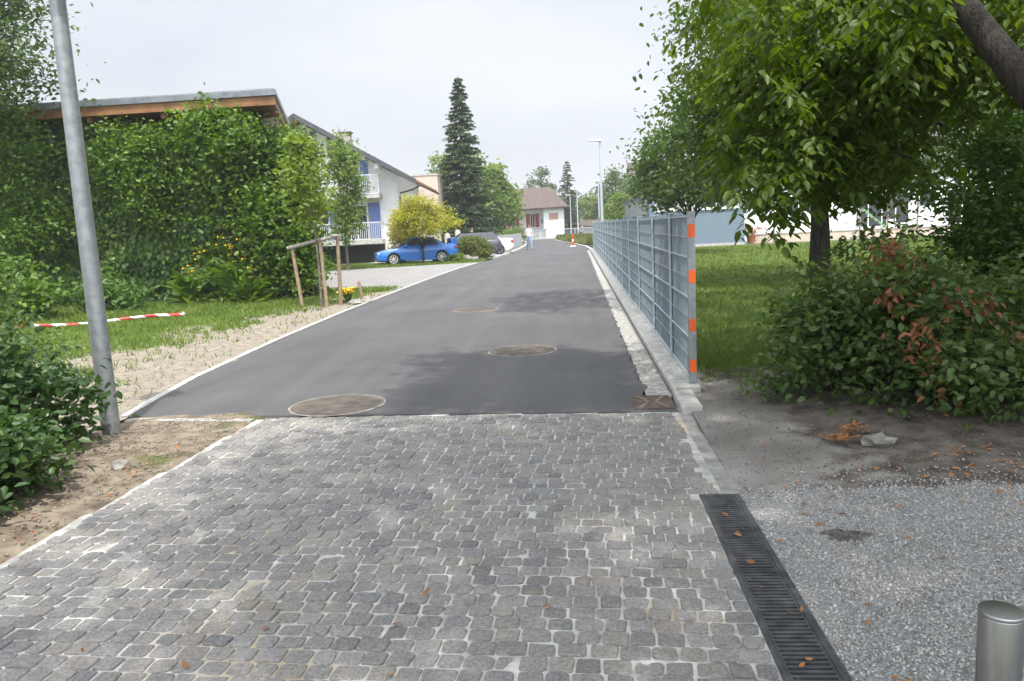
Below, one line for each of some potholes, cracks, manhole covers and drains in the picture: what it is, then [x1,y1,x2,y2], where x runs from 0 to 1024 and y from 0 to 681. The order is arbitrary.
manhole cover [488,345,557,356]
manhole cover [288,394,386,416]
